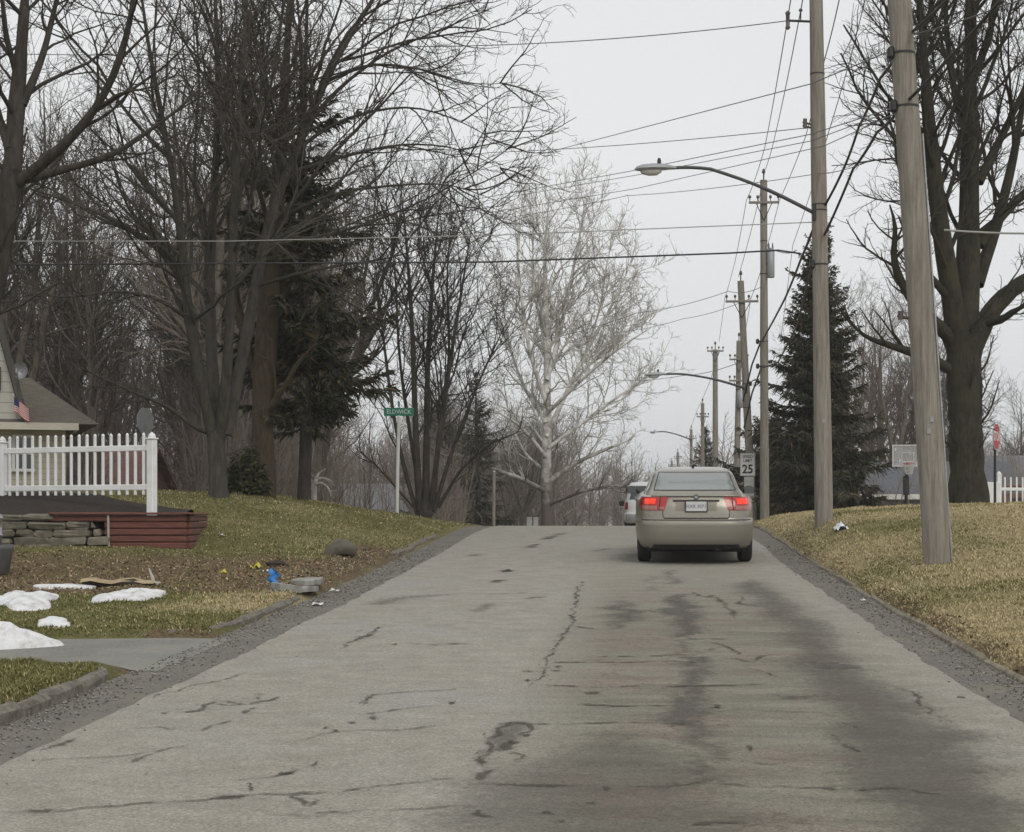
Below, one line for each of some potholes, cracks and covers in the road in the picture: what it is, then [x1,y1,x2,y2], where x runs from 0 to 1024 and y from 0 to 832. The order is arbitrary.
crack [30,771,442,812]
crack [664,782,835,791]
crack [185,697,278,722]
crack [52,728,184,761]
